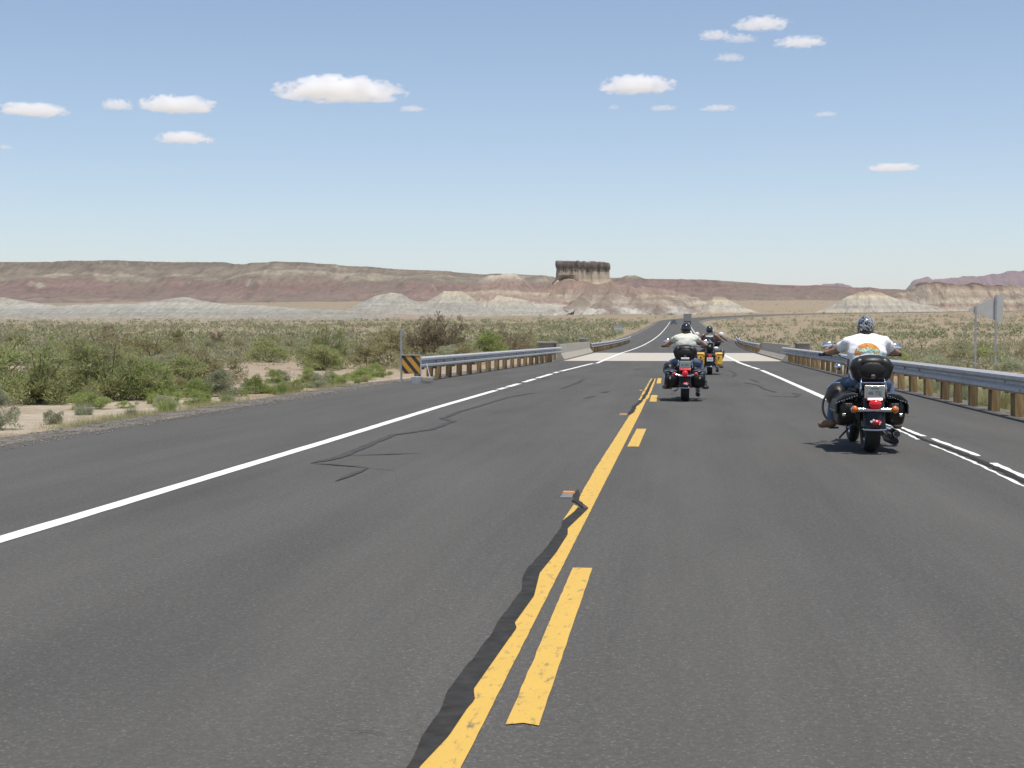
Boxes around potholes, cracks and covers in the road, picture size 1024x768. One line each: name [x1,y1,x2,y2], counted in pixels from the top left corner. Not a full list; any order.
crack [311,371,609,481]
crack [727,370,801,397]
crack [406,489,588,768]
